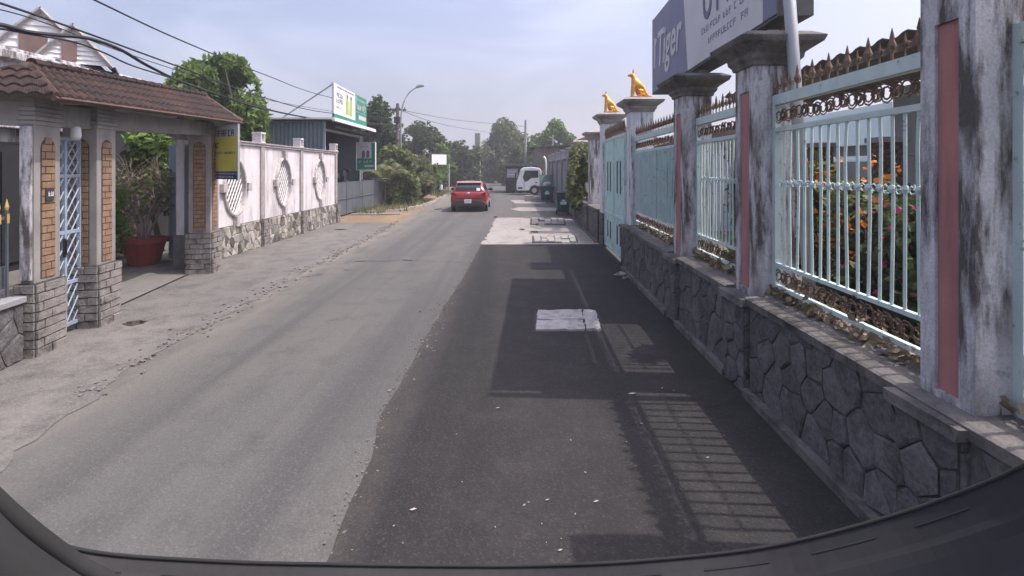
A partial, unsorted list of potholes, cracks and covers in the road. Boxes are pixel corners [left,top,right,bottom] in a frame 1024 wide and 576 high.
manhole cover [532,235,578,243]
manhole cover [530,217,566,225]
